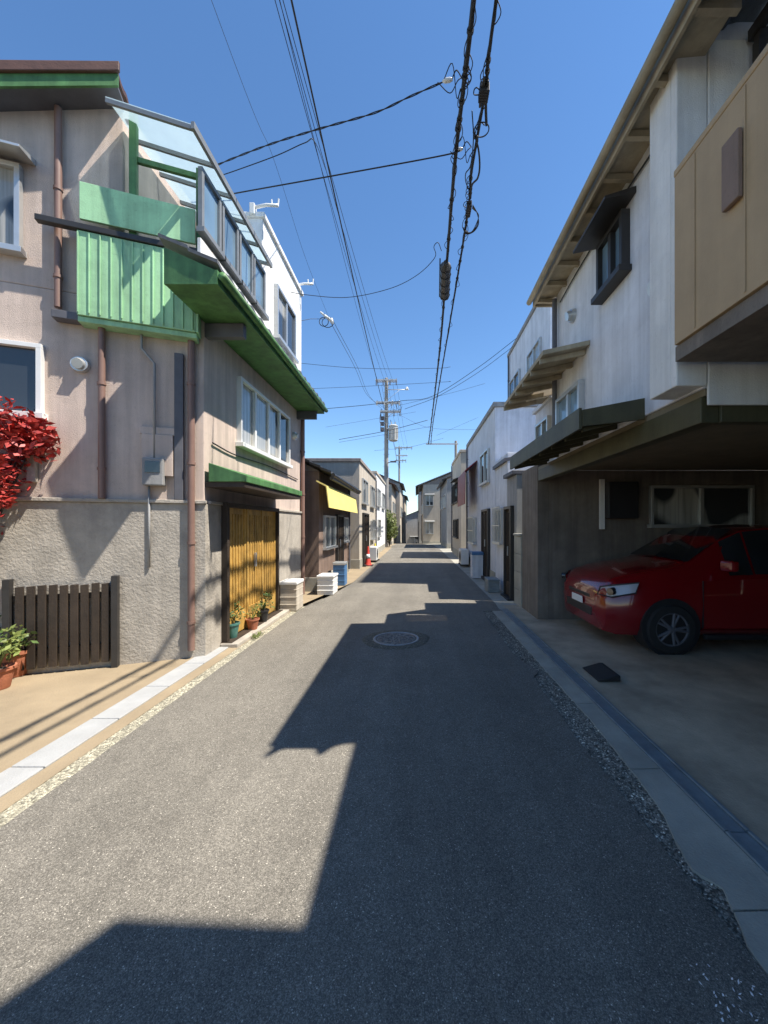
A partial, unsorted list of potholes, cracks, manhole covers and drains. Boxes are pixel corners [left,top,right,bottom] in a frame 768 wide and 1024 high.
manhole cover [362,630,430,650]
